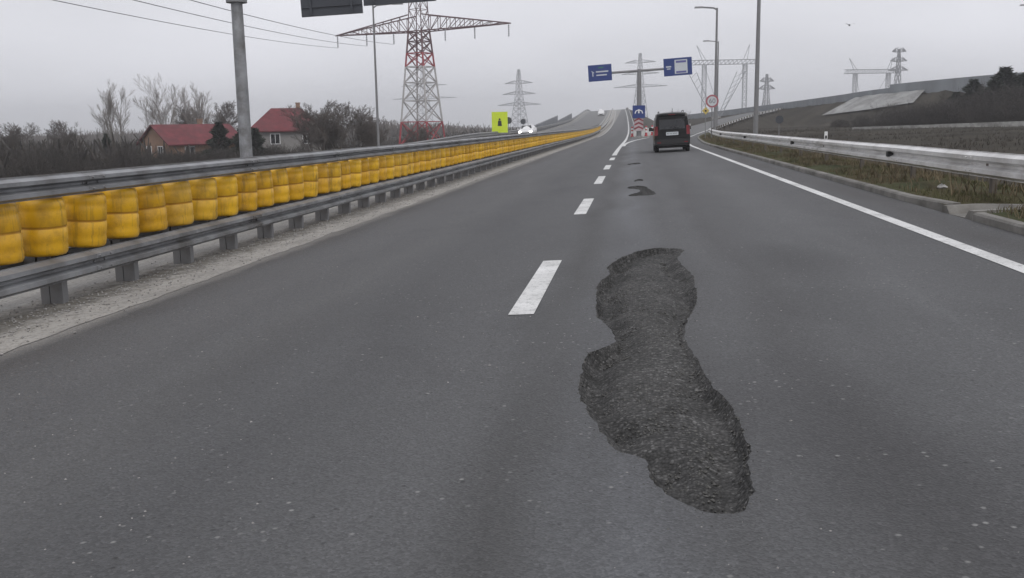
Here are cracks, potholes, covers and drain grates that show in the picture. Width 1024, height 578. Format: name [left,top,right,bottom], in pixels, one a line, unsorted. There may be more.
pothole [628,186,656,196]
pothole [579,248,755,514]
